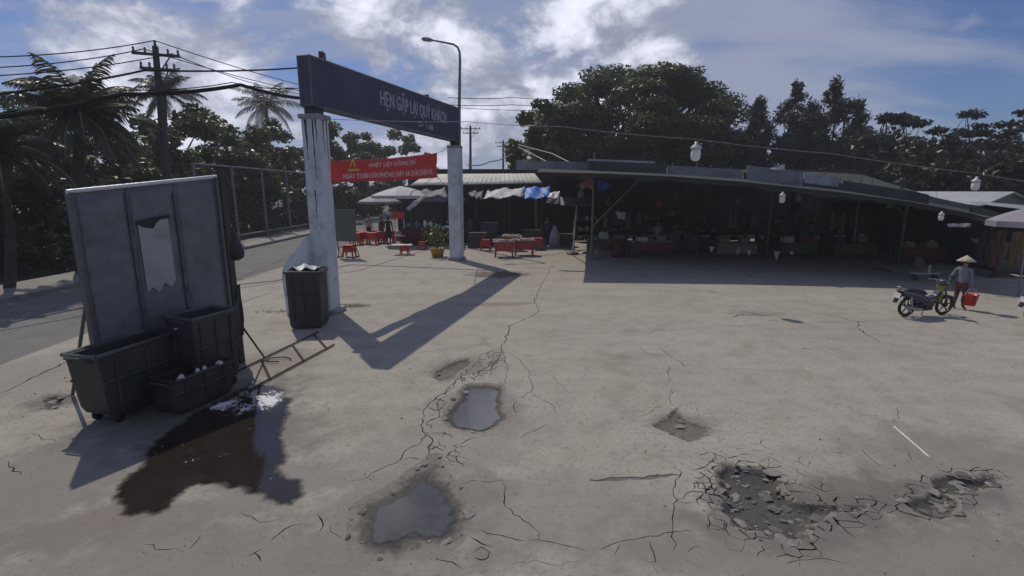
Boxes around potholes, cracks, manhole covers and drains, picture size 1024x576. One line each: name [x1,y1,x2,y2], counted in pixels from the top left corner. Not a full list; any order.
pothole [714,462,870,549]
pothole [440,382,513,434]
pothole [652,407,712,442]
crack [242,513,299,562]
crack [600,439,1009,573]
pothole [41,394,71,410]
crack [352,268,568,481]
pothole [431,357,474,382]
crack [436,482,586,568]
pothole [344,453,479,562]
pothole [895,471,1002,523]
